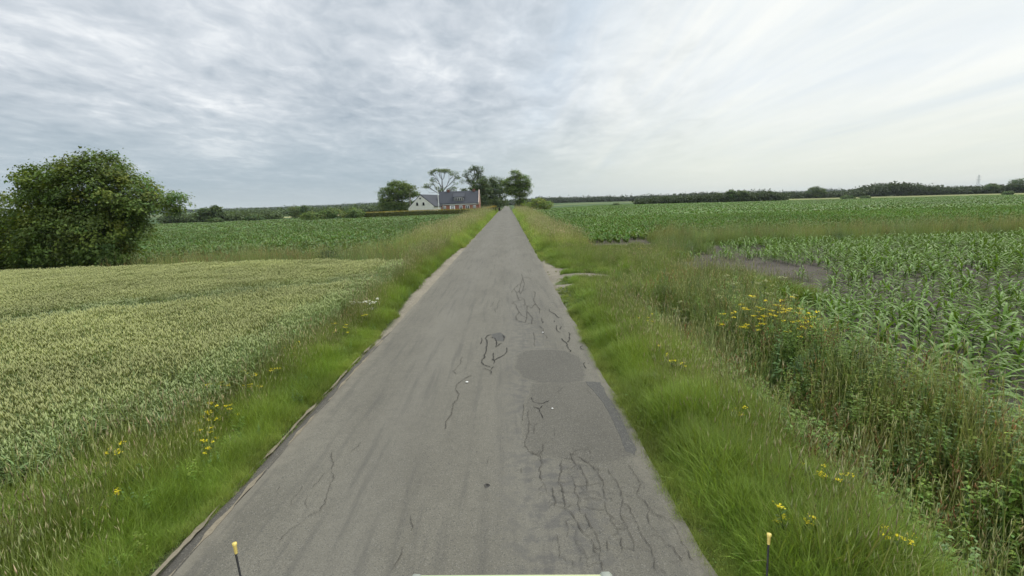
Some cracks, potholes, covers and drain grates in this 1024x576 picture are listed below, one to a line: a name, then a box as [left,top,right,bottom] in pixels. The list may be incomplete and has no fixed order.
crack [278,452,334,538]
crack [518,388,692,574]
crack [493,277,589,368]
